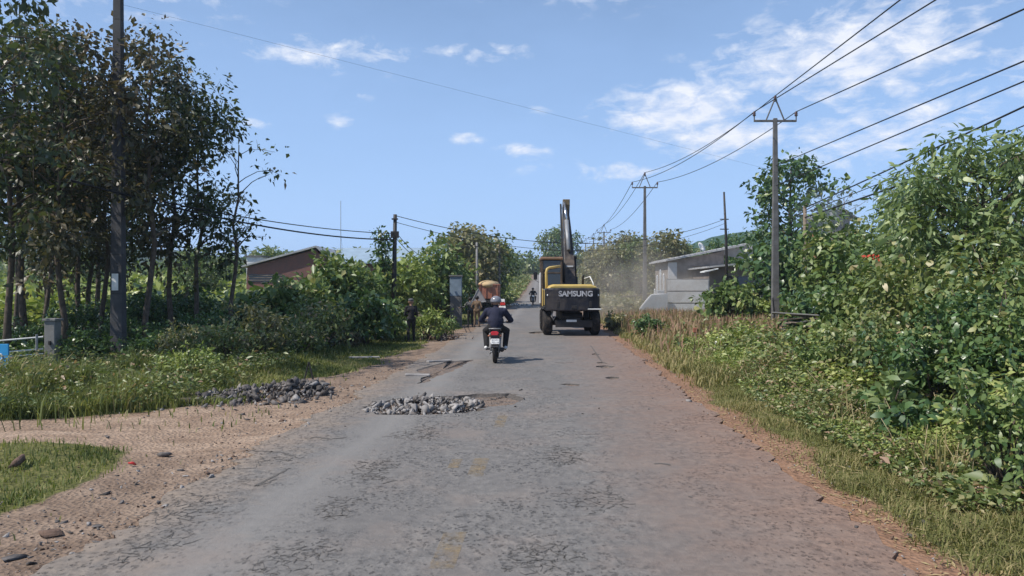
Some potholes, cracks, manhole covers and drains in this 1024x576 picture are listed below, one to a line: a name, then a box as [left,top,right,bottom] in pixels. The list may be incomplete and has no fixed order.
crack [501,540,587,575]
crack [567,485,636,515]
crack [239,545,342,575]
crack [315,496,366,521]
crack [114,492,225,568]
crack [346,458,398,484]
crack [240,436,346,486]
crack [542,445,585,465]
pothole [363,393,523,415]
